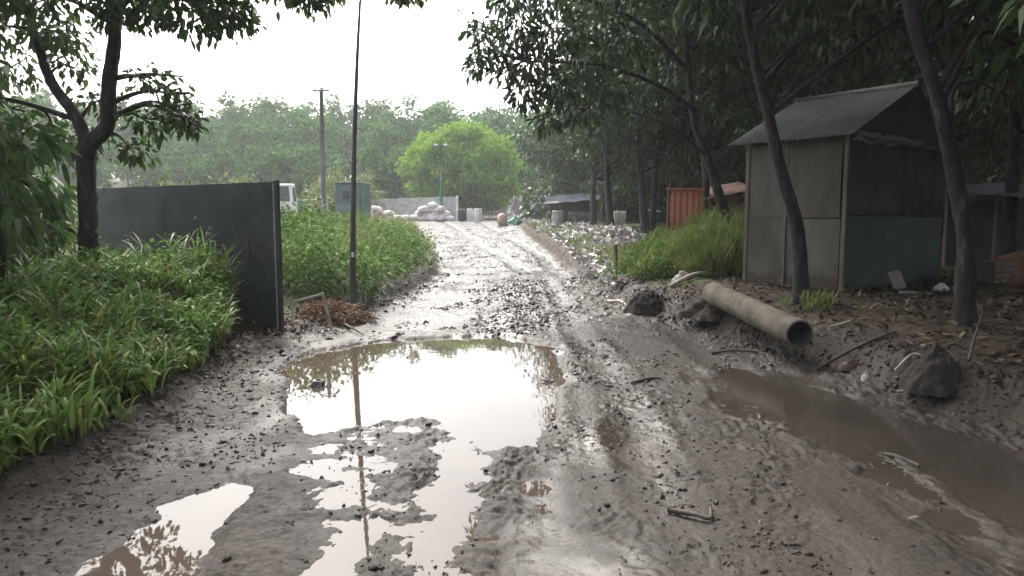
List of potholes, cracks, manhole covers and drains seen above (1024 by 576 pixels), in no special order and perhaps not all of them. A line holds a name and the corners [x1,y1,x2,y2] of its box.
pothole [227,330,597,576]
